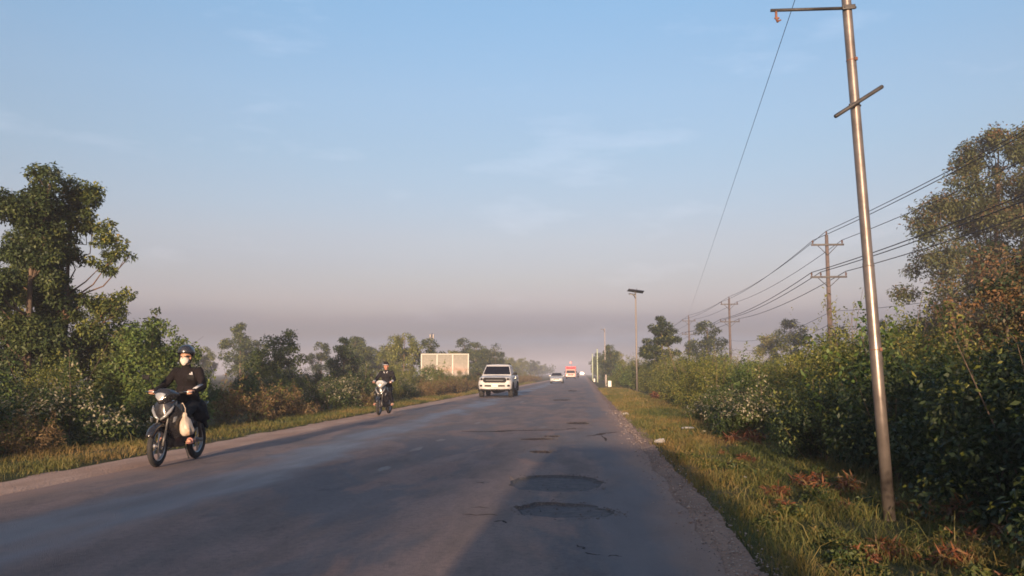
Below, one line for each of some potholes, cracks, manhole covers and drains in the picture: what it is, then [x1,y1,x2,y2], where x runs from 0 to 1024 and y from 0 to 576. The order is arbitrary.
crack [465,428,616,441]
pothole [509,474,606,494]
pothole [507,499,628,521]
